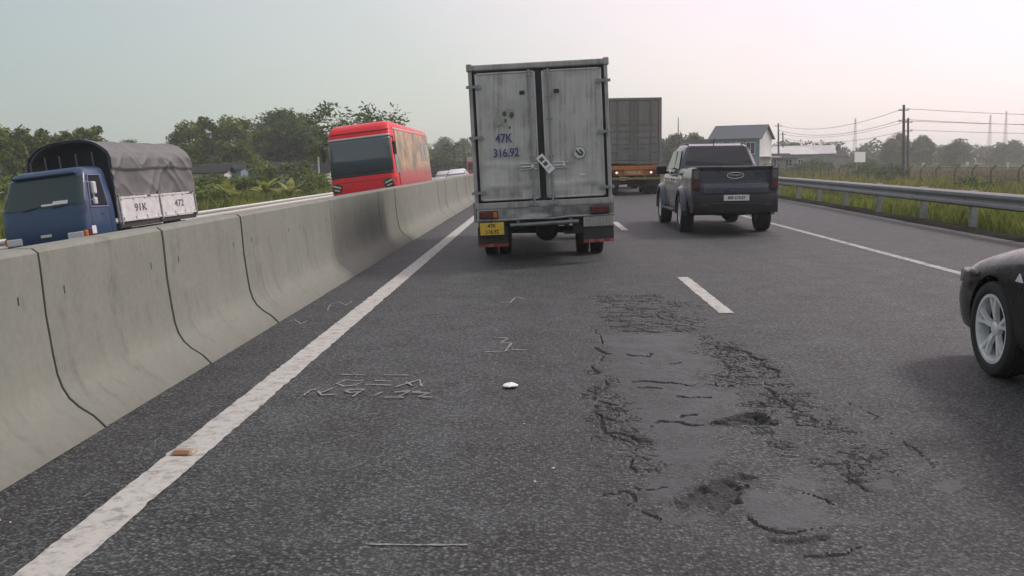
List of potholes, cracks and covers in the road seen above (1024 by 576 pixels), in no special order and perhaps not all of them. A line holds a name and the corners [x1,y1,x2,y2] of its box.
pothole [711,412,780,426]
pothole [673,472,761,516]
crack [579,294,938,559]
